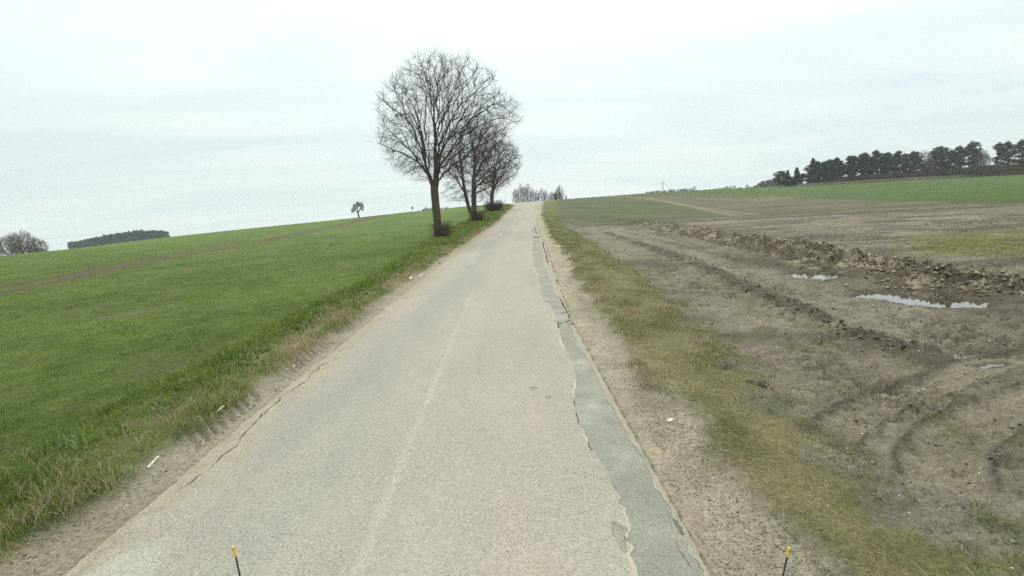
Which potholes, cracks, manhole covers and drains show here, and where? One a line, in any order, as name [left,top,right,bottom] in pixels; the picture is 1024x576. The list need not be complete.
crack [555,298,573,328]
crack [177,357,341,492]
